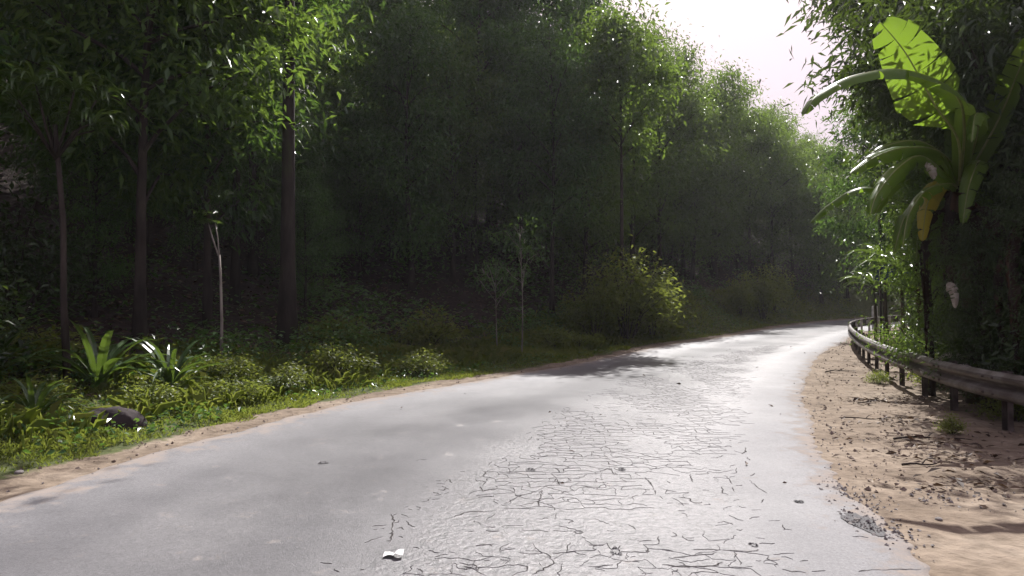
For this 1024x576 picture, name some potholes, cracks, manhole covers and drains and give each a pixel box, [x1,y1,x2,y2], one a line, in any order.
pothole [840,513,886,536]
crack [365,345,825,576]
